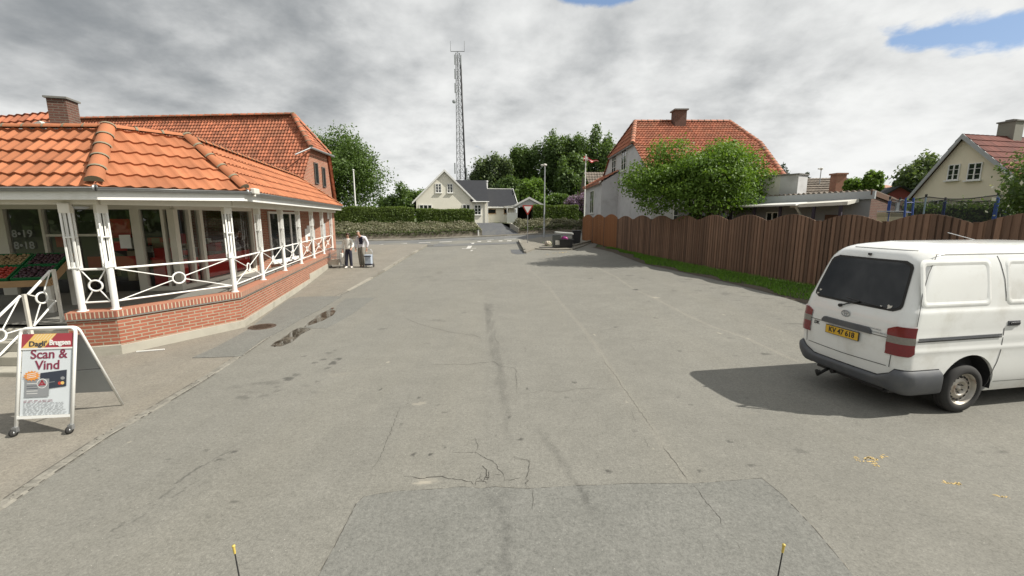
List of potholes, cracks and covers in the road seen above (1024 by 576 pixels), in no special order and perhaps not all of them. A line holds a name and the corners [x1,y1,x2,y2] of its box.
crack [406,442,534,506]
